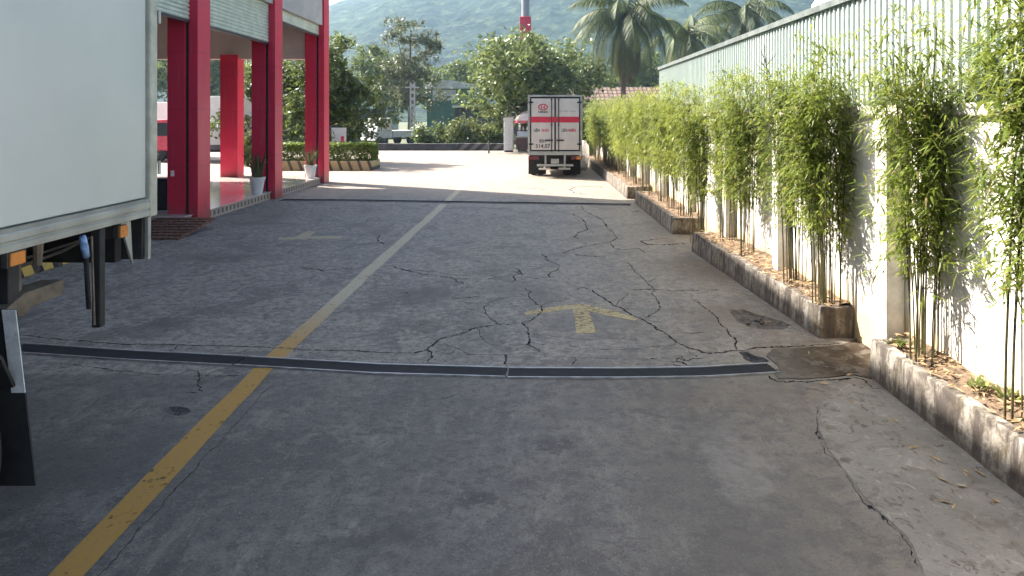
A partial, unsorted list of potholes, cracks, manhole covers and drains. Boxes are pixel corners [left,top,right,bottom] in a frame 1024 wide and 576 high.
crack [188,368,239,393]
crack [768,376,918,566]
crack [394,186,839,367]
pothole [164,406,191,416]
